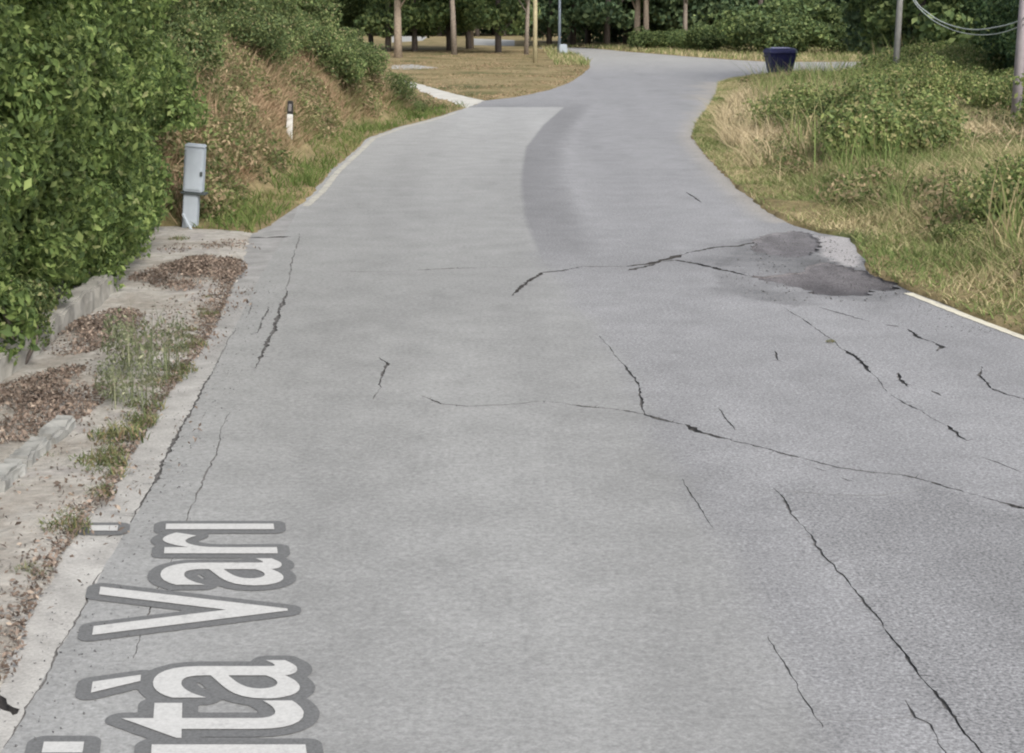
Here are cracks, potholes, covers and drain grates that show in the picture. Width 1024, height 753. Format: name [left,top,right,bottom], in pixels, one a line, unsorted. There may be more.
crack [423,336,1024,753]
crack [249,237,300,368]
crack [783,307,1020,472]
crack [512,242,754,296]
crack [373,358,390,399]
crack [133,412,230,658]
